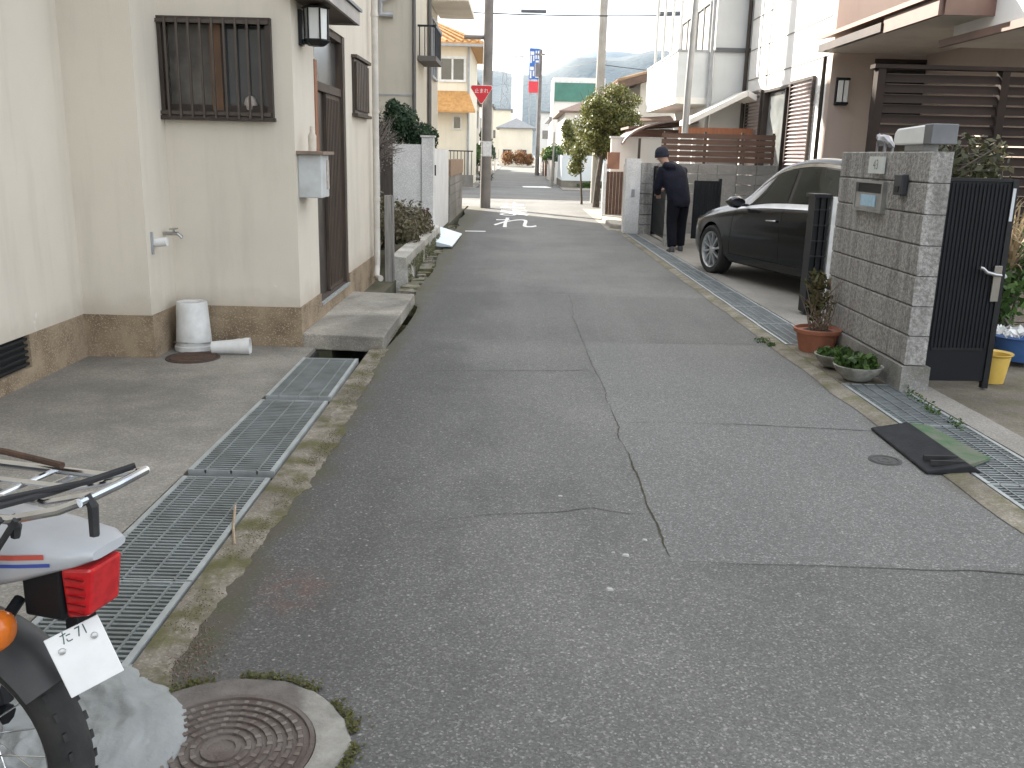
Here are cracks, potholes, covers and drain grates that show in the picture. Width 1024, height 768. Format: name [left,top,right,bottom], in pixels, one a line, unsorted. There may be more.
manhole cover [160,670,374,768]
drain grate [679,270,717,281]
drain grate [188,399,328,478]
drain grate [114,476,271,585]
drain grate [930,425,1024,485]
drain grate [710,292,760,306]
drain grate [987,484,1024,511]
drain grate [667,262,700,271]
manhole cover [165,351,220,364]
crack [454,296,1024,575]
drain grate [266,357,358,402]
